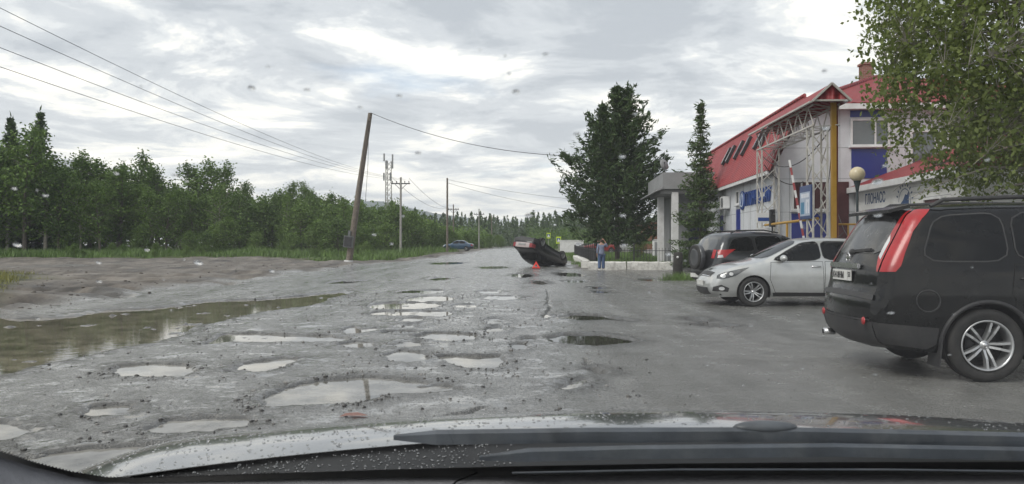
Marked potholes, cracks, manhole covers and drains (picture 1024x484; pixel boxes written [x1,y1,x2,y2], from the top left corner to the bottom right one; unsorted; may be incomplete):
pothole [196,331,362,345]
pothole [541,331,647,346]
pothole [243,372,476,408]
pothole [66,399,148,418]
pothole [407,330,487,341]
pothole [0,416,55,441]
pothole [435,352,514,369]
pothole [403,295,459,303]
crack [544,290,553,315]
pothole [336,325,384,334]
pothole [210,354,312,375]
pothole [363,301,446,310]
